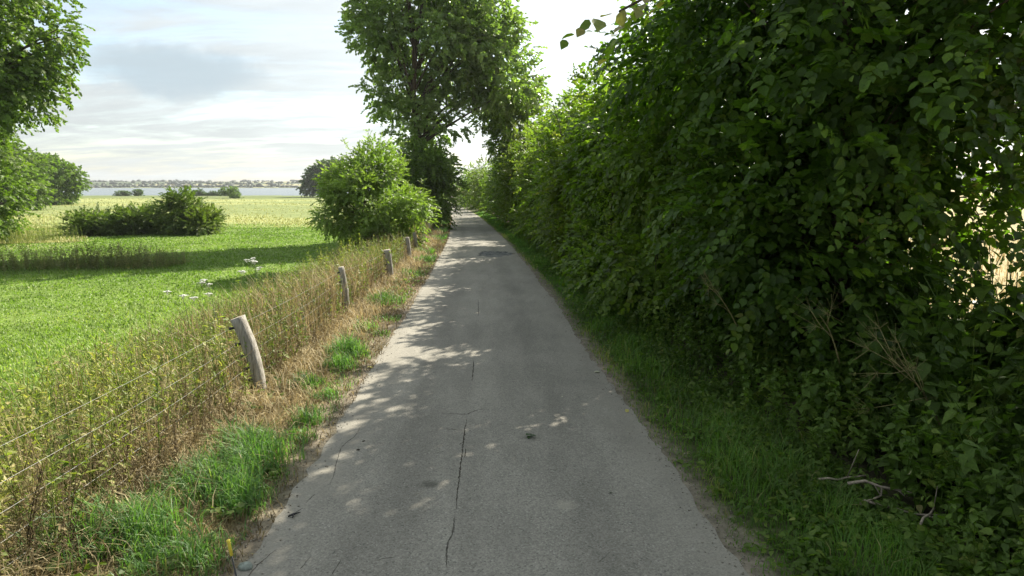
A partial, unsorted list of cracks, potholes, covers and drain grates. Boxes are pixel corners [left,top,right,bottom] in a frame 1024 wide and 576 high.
crack [437,409,481,566]
crack [296,428,360,512]
